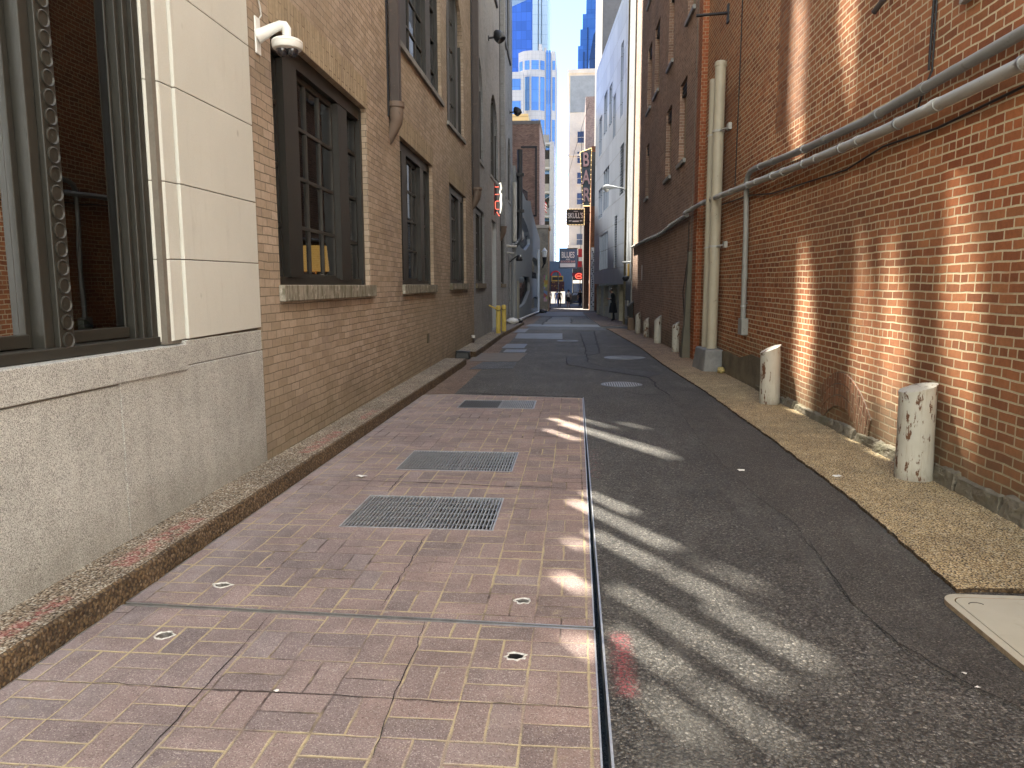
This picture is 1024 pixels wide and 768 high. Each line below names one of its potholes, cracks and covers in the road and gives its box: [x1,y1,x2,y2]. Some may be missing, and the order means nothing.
drain grate [339,495,504,531]
utility cover [944,594,1024,671]
crack [542,317,670,395]
drain grate [457,400,537,409]
drain grate [395,450,519,472]
crack [381,539,450,606]
pothole [504,651,527,661]
crack [18,618,594,768]
pothole [154,631,176,640]
